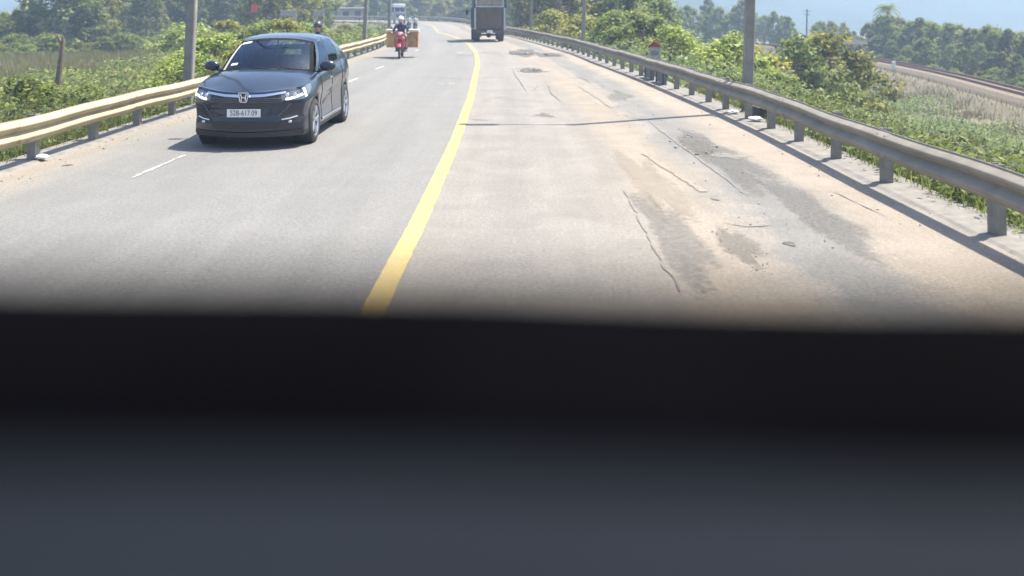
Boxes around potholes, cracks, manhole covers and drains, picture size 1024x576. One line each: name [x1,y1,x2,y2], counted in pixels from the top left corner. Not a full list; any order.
crack [648,120,745,201]
pothole [508,49,539,57]
